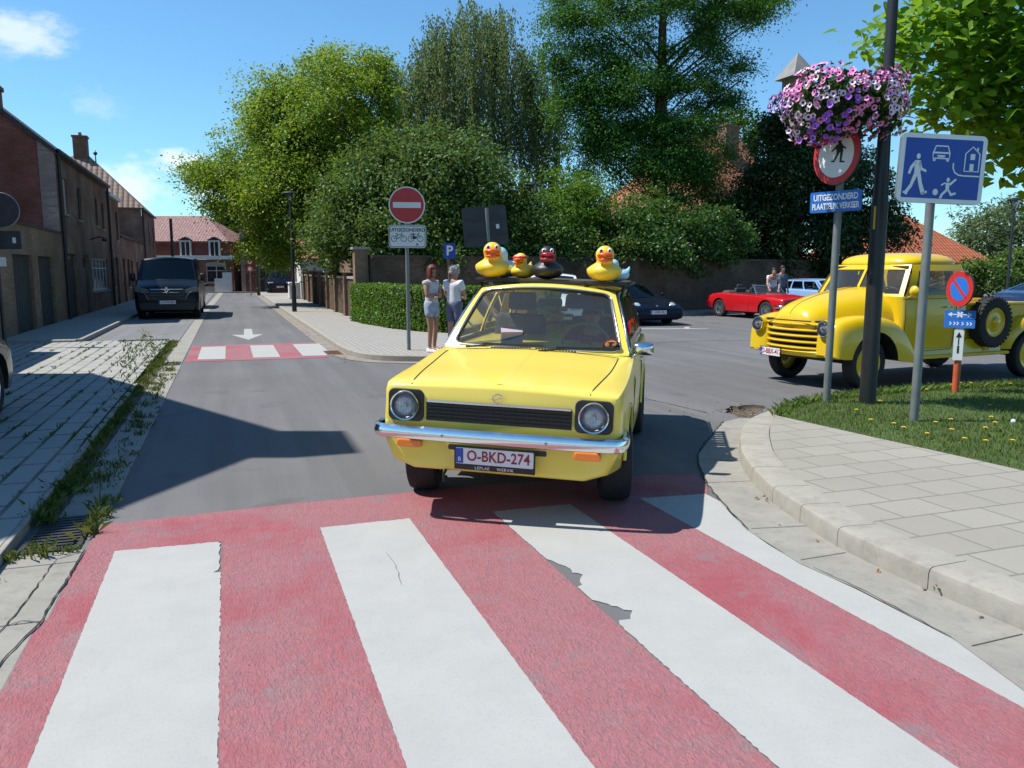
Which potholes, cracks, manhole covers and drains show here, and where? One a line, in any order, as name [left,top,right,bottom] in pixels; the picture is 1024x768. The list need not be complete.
drain grate [17,515,96,556]
pothole [724,404,766,418]
